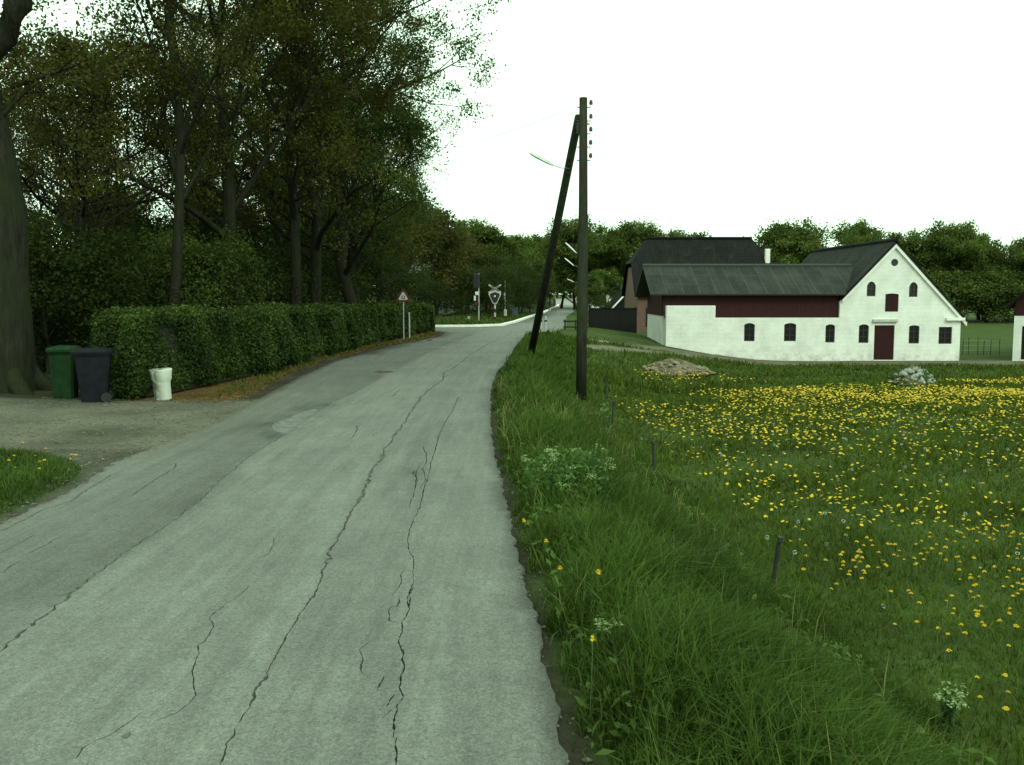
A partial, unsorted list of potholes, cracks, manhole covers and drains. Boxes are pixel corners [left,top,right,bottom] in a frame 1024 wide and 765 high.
crack [76,585,250,758]
crack [130,462,177,497]
crack [358,397,459,765]
